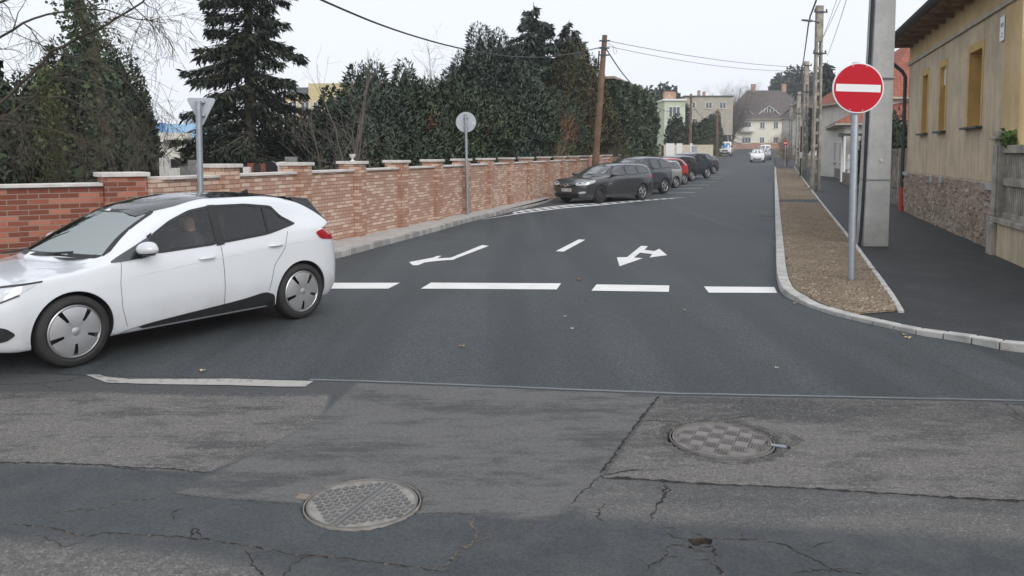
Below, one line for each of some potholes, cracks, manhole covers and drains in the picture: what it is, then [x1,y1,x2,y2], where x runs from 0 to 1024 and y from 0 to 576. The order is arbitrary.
crack [641,484,871,576]
manhole cover [294,479,421,532]
pothole [682,536,717,549]
manhole cover [669,422,791,460]
crack [10,493,492,576]
